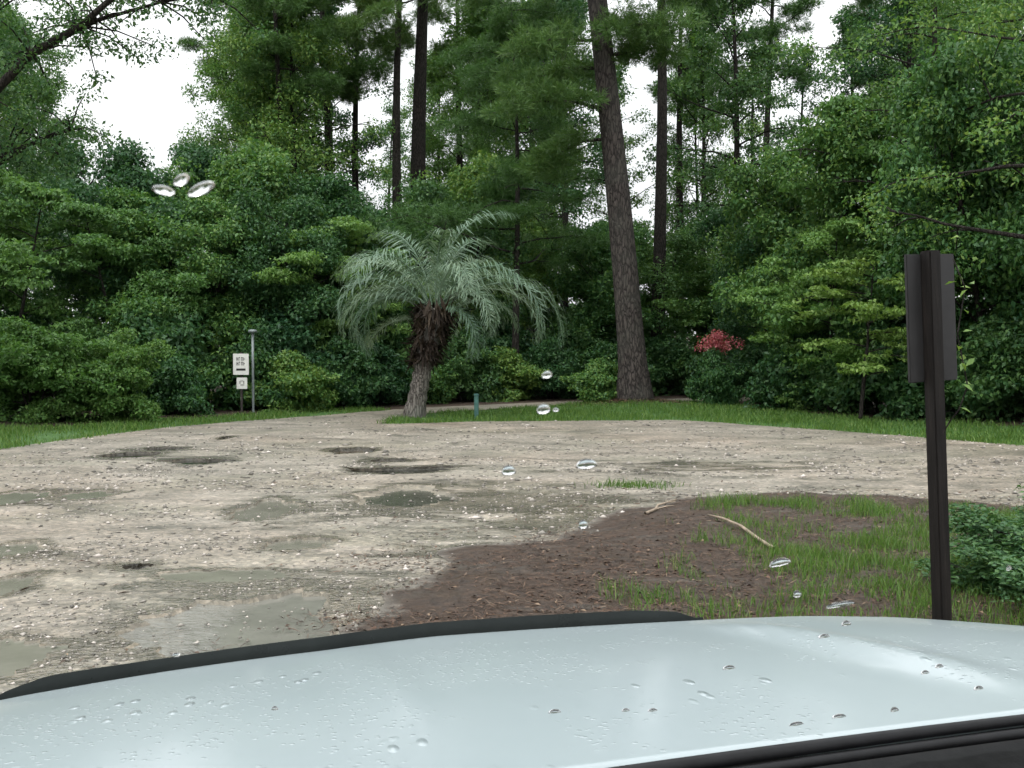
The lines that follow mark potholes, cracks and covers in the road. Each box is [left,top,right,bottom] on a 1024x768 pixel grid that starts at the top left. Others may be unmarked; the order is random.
pothole [53,490,120,500]
pothole [352,484,468,507]
pothole [114,588,337,657]
pothole [345,465,458,474]
pothole [0,572,43,596]
pothole [0,491,52,505]
pothole [226,497,305,522]
pothole [0,635,71,676]
